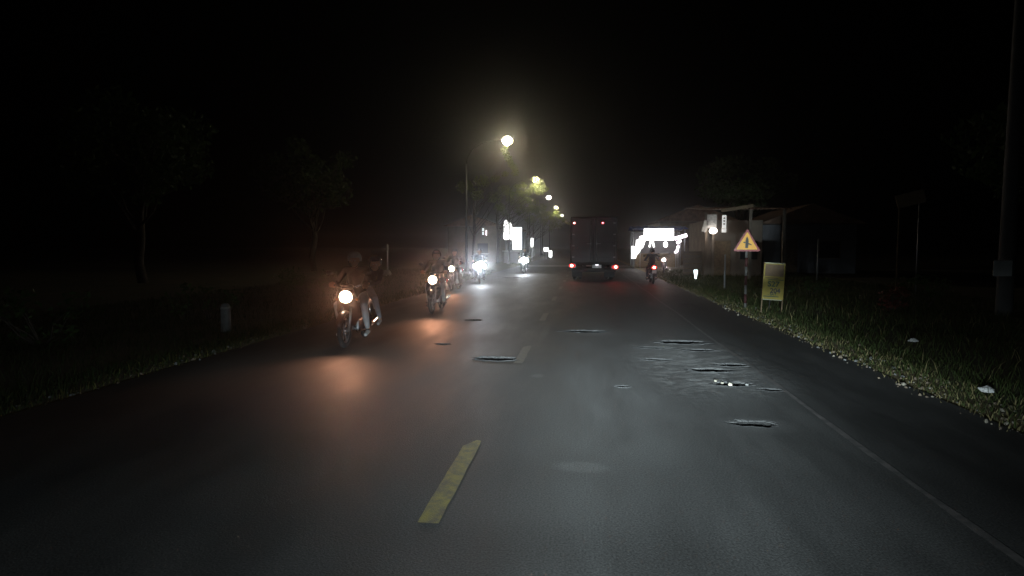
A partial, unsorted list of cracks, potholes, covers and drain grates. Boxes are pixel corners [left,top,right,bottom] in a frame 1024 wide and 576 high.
pothole [724,419,782,429]
